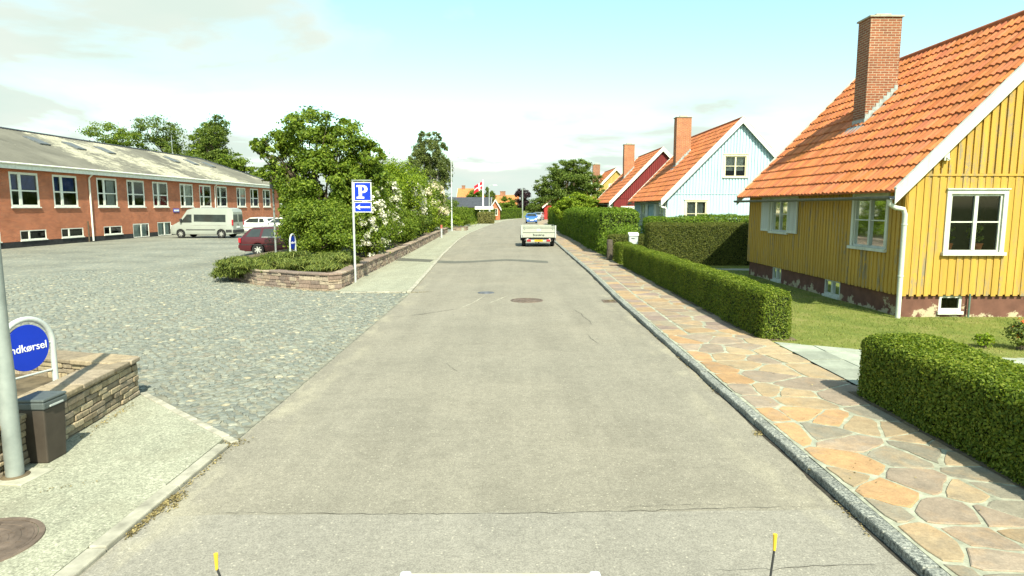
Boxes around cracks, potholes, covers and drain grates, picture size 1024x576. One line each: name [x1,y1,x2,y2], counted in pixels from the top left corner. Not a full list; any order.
manhole cover [0,517,46,562]
